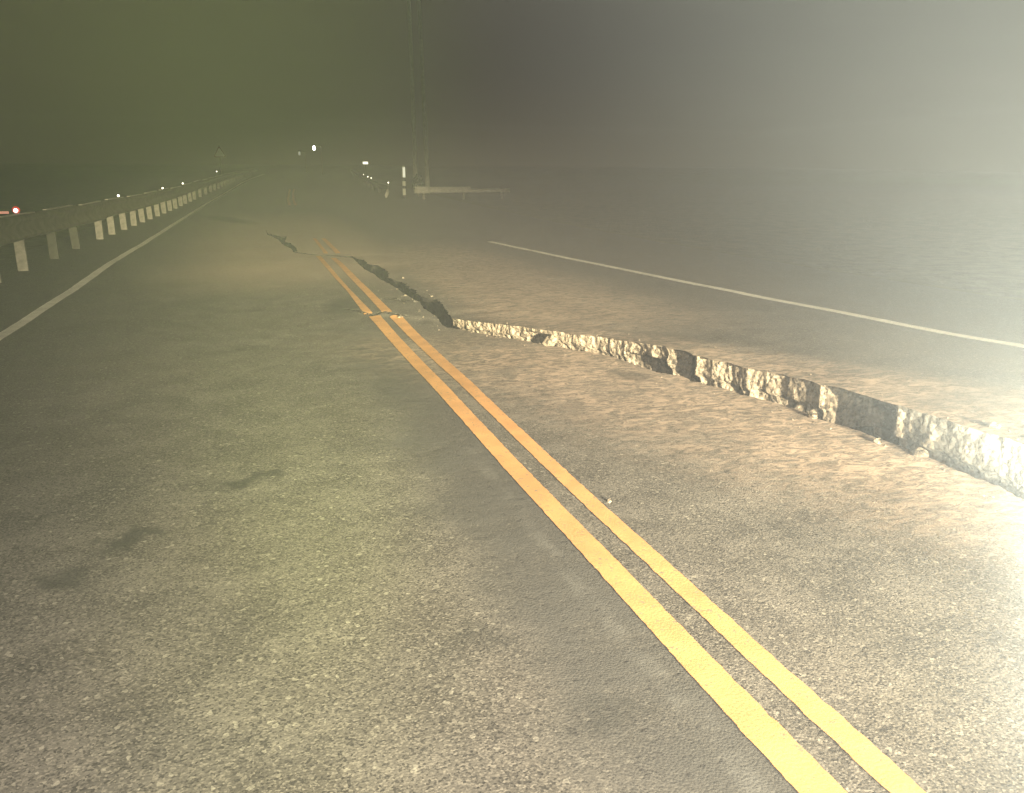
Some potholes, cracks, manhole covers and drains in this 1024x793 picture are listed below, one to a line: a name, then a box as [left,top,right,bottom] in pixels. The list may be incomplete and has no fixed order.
crack [266,231,1024,499]
